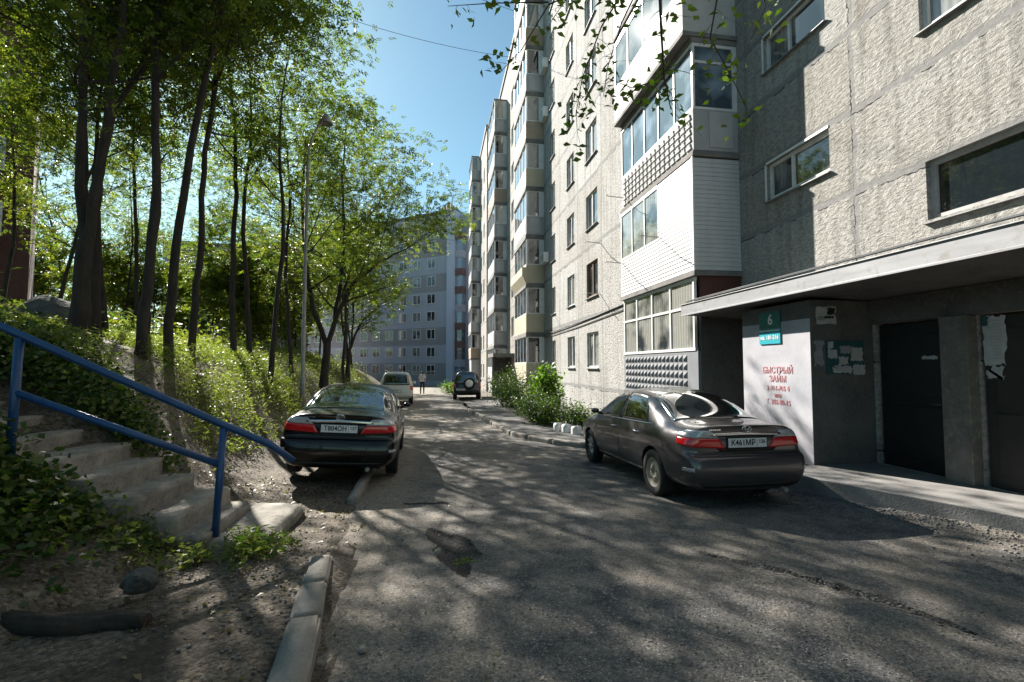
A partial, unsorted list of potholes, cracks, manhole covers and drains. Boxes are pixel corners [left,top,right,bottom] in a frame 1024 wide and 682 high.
pothole [422,526,489,583]
crack [700,551,1000,643]
